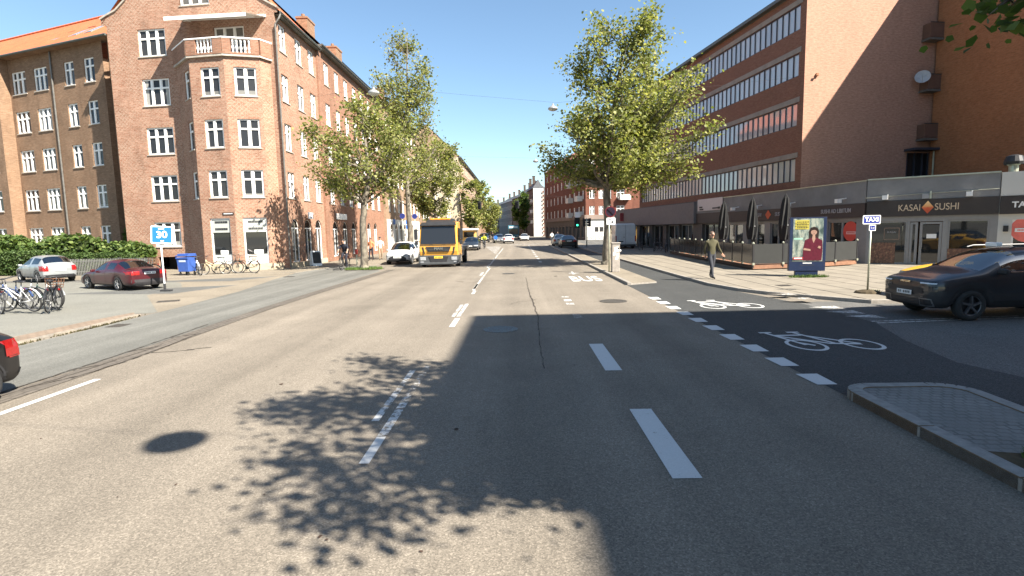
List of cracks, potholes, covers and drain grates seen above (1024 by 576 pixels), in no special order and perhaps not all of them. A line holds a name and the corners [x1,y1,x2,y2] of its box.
crack [519,280,545,369]
